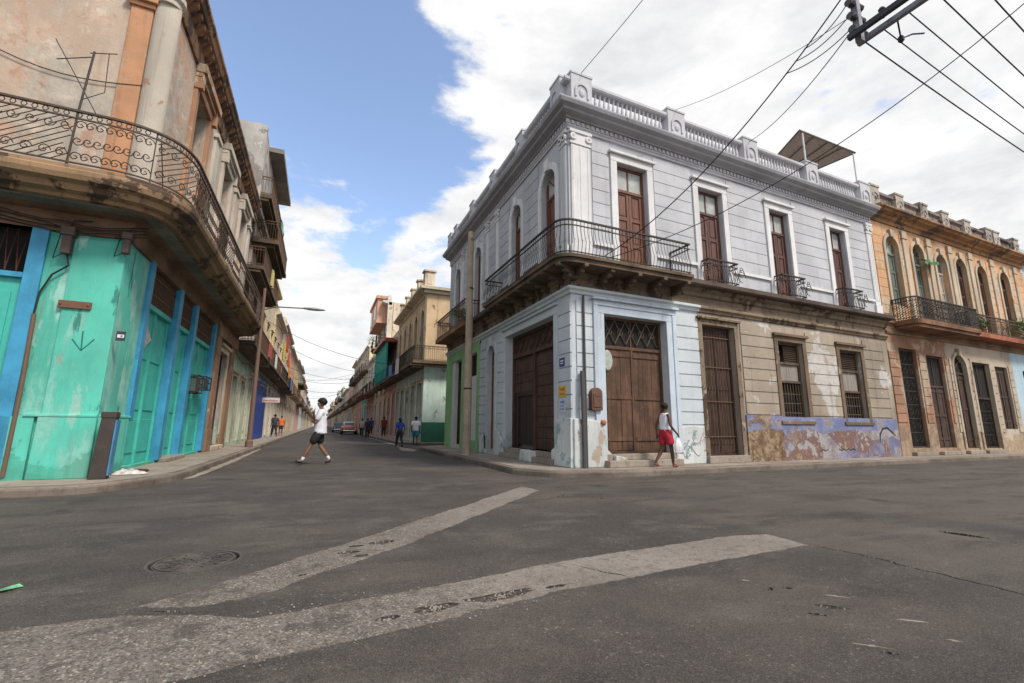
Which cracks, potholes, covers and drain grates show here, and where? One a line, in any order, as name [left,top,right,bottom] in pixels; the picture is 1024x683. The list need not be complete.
manhole cover [144,550,243,574]
pothole [412,602,461,614]
pothole [463,588,533,603]
